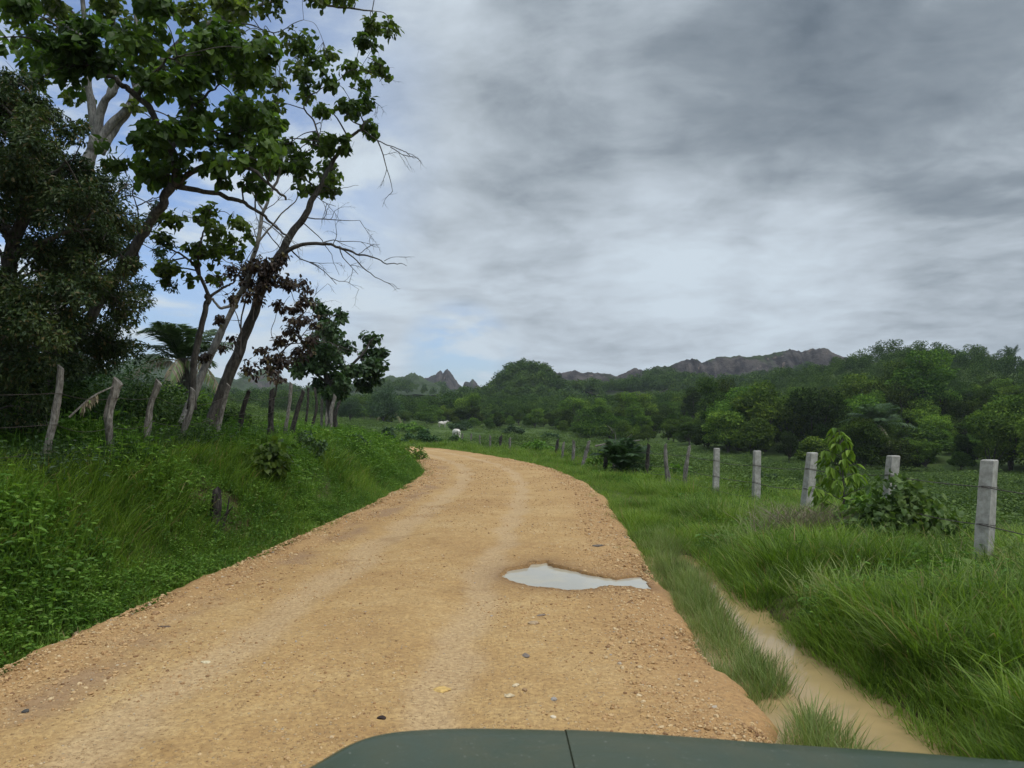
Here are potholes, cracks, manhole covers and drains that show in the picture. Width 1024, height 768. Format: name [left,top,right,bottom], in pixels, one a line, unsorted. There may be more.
pothole [498,560,651,591]
